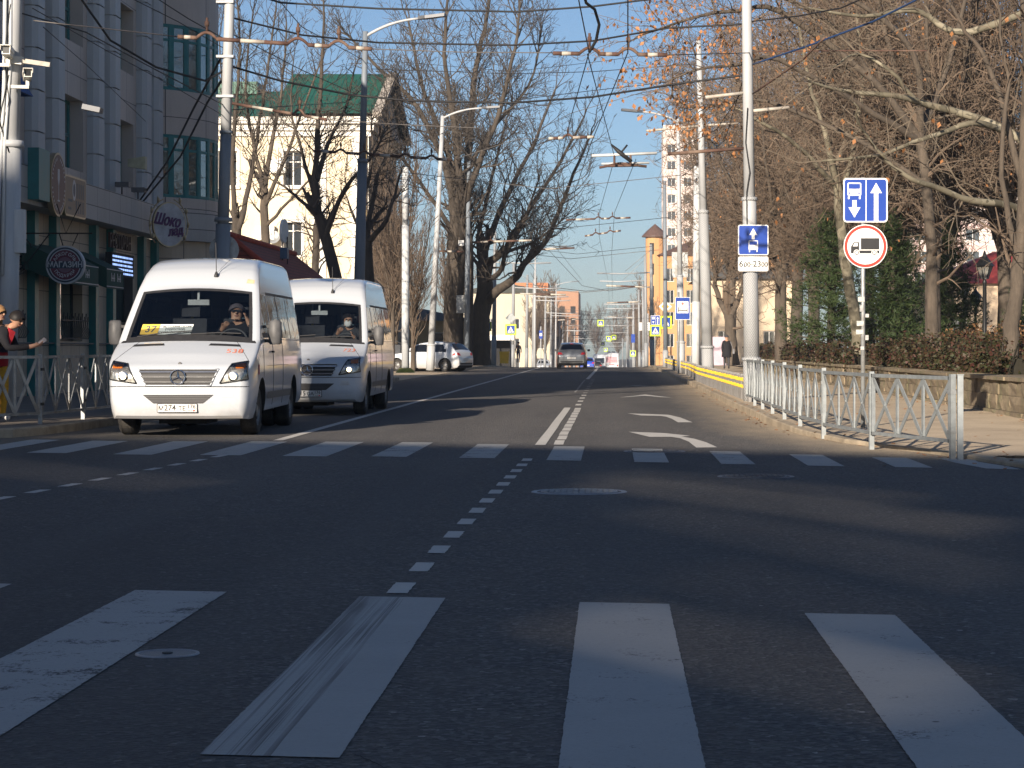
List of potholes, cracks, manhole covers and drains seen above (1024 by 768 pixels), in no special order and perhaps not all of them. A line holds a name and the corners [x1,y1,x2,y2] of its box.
manhole cover [135,649,200,658]
